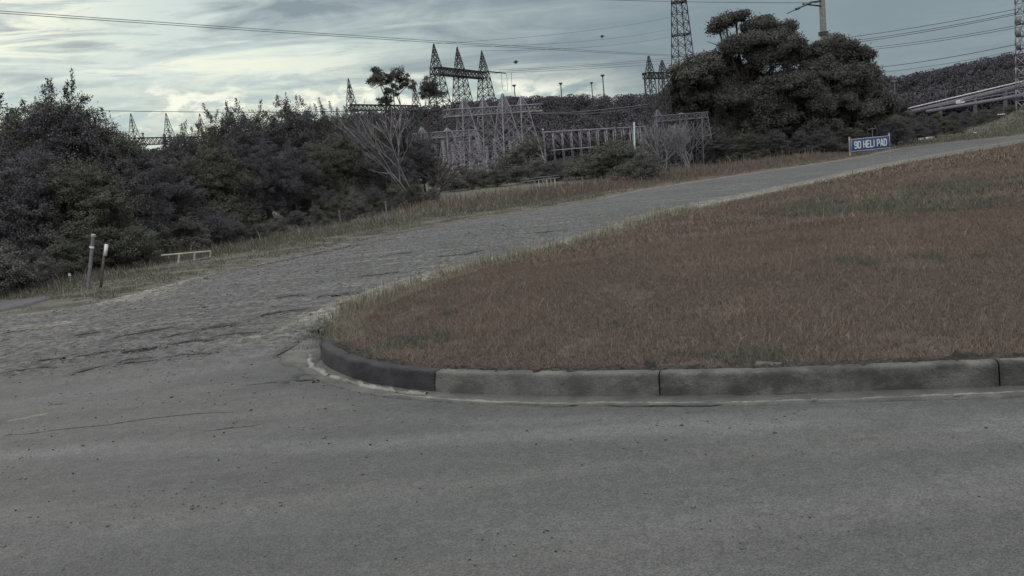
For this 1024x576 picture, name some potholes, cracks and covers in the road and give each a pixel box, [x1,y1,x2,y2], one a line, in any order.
crack [13,412,260,435]
crack [73,295,336,385]
crack [6,365,56,374]
